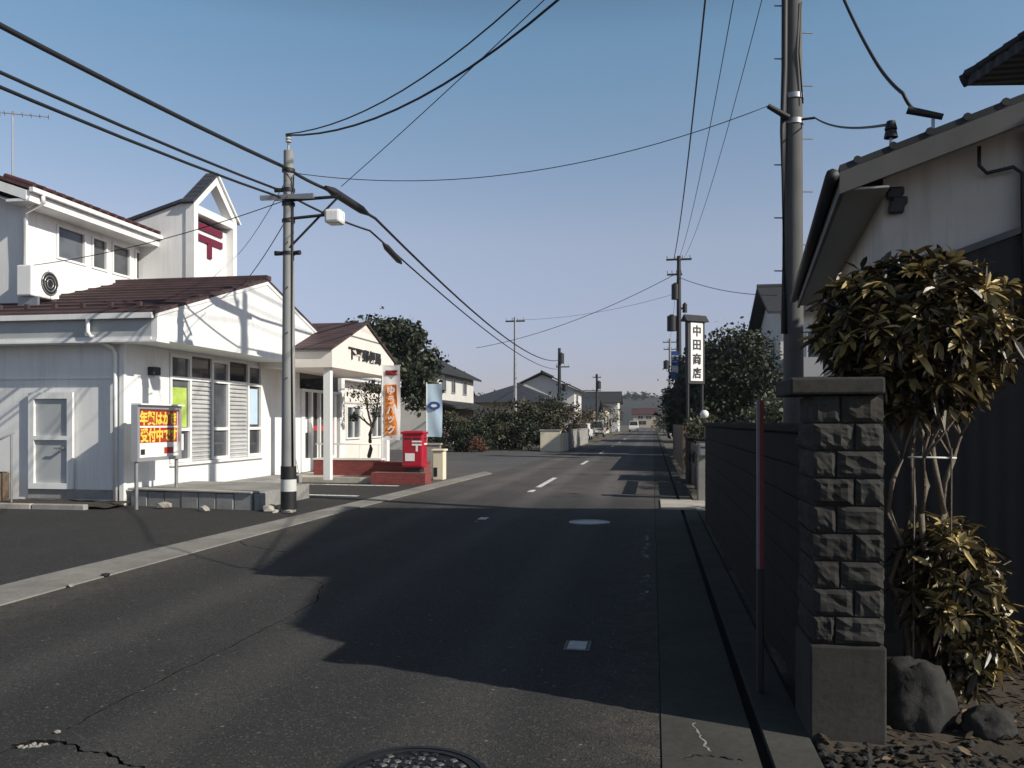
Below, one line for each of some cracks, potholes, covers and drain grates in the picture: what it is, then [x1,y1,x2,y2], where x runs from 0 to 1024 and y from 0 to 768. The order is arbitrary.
utility cover [563,640,592,652]
crack [688,722,726,759]
manhole cover [337,746,486,768]
crack [65,578,323,730]
crack [3,741,145,768]
